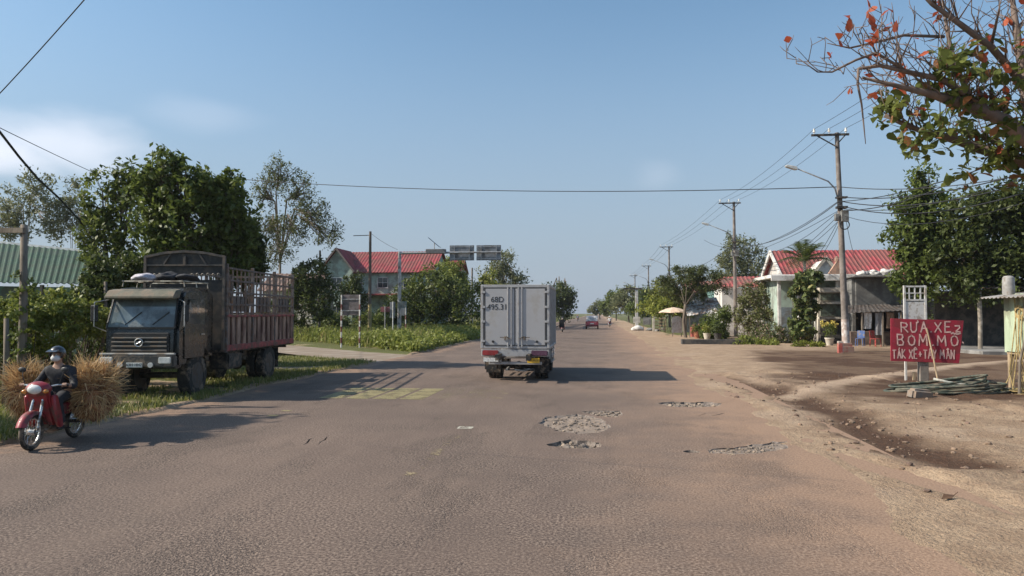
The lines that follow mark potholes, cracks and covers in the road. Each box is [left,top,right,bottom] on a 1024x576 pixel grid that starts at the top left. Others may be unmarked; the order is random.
pothole [708,441,788,455]
pothole [547,439,601,449]
pothole [539,414,611,434]
